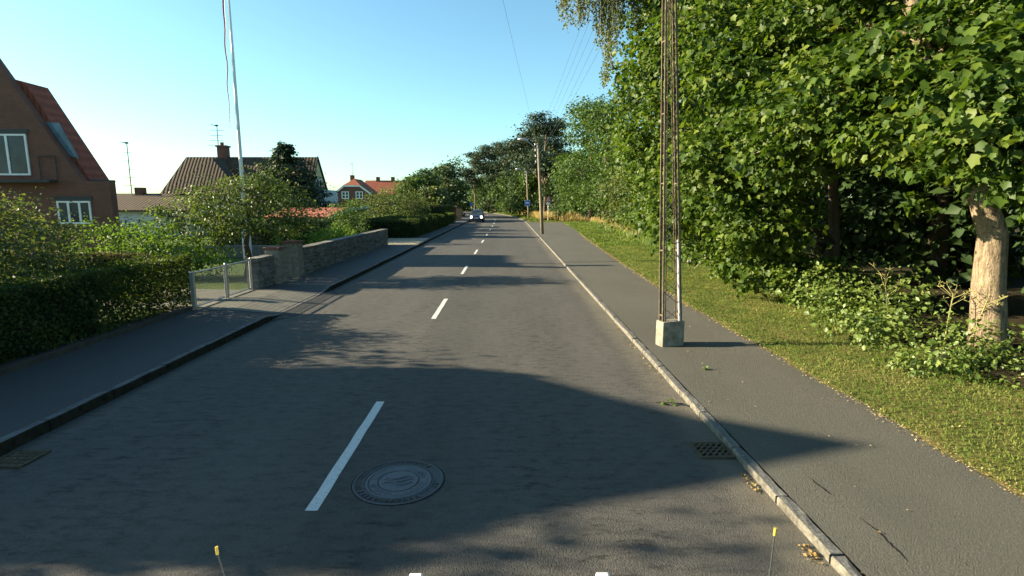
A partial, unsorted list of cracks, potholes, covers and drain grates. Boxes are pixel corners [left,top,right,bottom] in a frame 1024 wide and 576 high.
drain grate [689,442,736,459]
crack [859,517,908,561]
drain grate [0,450,51,468]
manhole cover [351,459,445,506]
